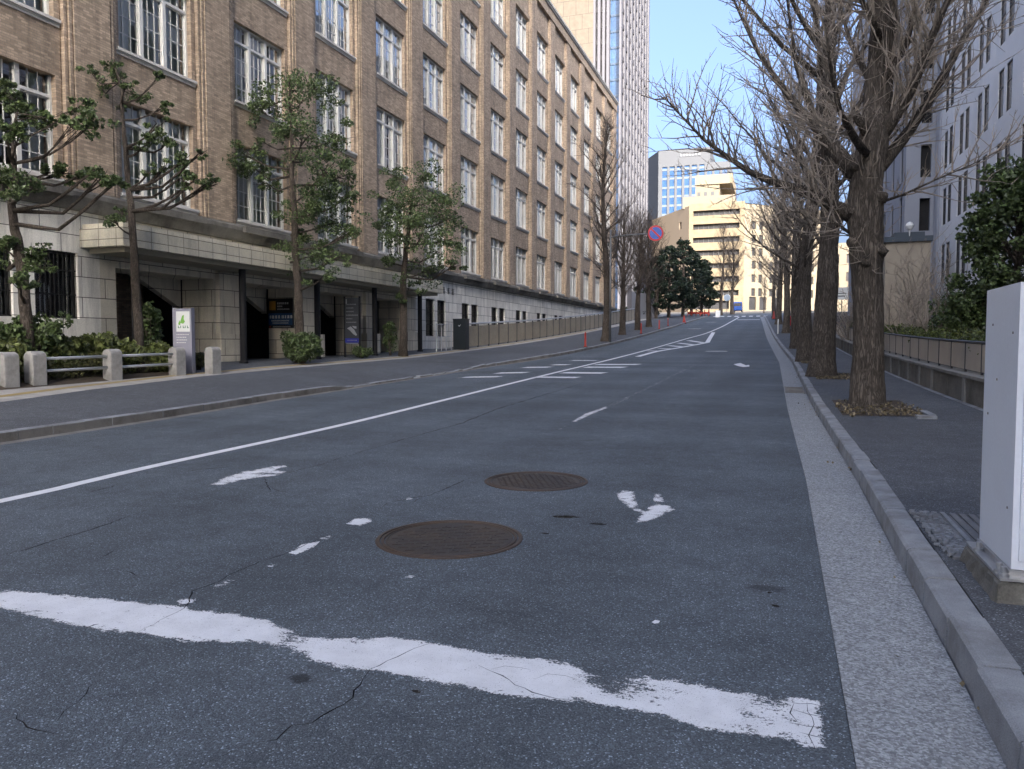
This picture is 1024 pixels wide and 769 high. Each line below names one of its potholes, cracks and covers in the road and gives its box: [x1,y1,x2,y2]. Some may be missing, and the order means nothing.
manhole cover [484,471,588,491]
manhole cover [375,520,523,559]
crack [3,664,142,744]
drain grate [784,386,806,394]
crack [8,516,128,554]
crack [201,670,370,767]
